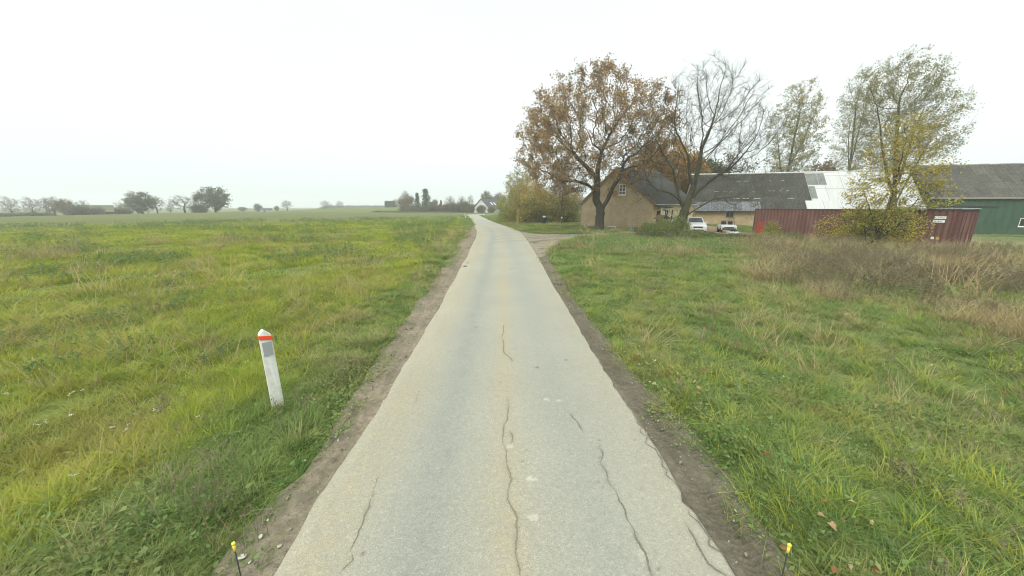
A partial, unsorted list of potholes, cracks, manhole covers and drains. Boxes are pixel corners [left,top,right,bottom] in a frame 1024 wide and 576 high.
crack [342,478,378,570]
crack [502,397,520,574]
crack [600,449,652,576]
crack [685,508,726,575]
